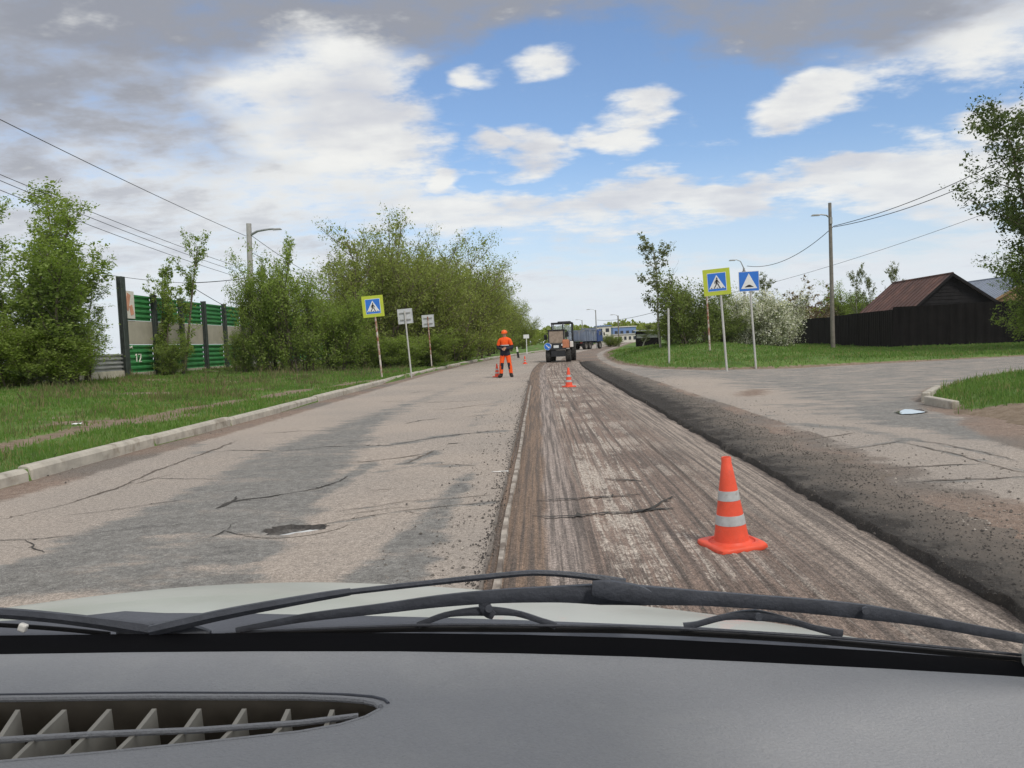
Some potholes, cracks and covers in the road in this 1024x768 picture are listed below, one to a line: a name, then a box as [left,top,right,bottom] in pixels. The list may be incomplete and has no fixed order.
crack [805,432,1022,482]
crack [10,523,188,553]
crack [0,440,237,520]
crack [532,479,673,517]
pothole [239,521,348,538]
